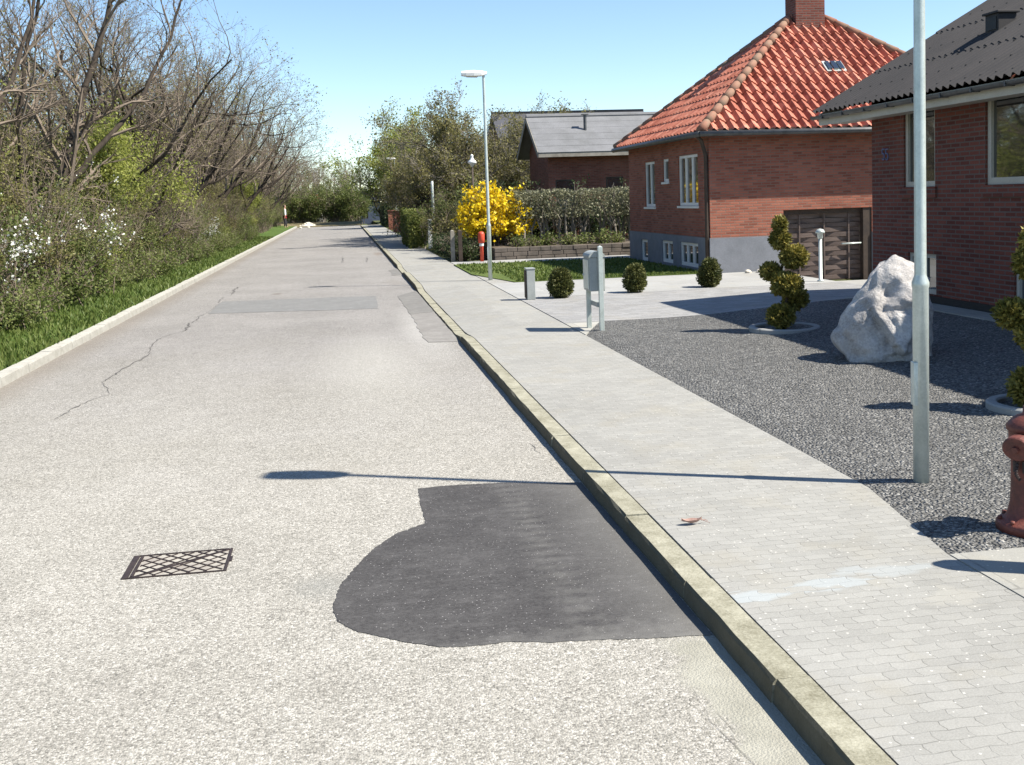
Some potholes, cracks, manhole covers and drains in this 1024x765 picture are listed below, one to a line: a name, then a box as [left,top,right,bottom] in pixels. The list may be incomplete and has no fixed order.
crack [55,287,239,419]
